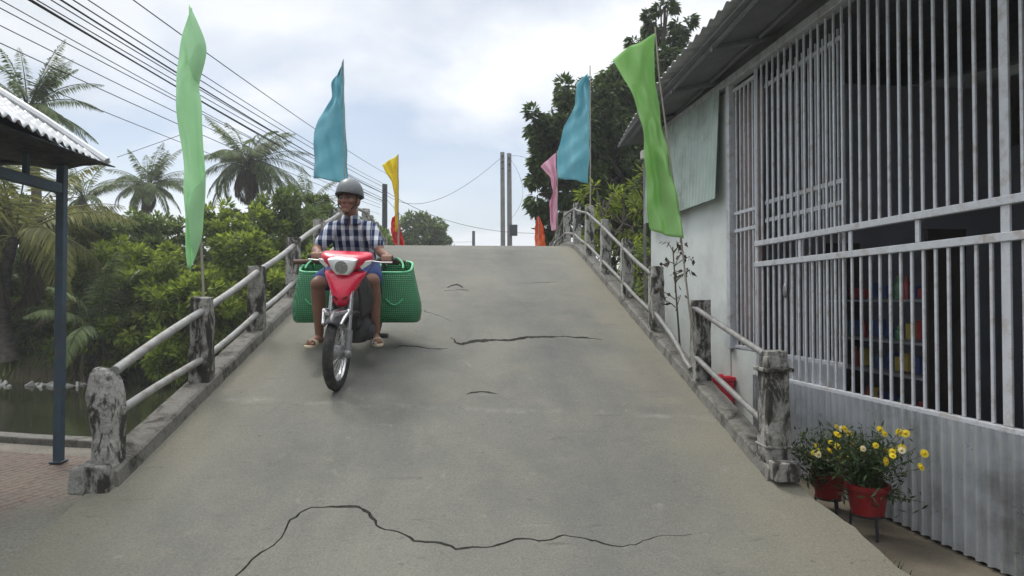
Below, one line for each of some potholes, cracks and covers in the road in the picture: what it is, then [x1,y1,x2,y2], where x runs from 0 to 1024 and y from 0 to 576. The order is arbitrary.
crack [395,310,602,350]
crack [235,505,691,576]
